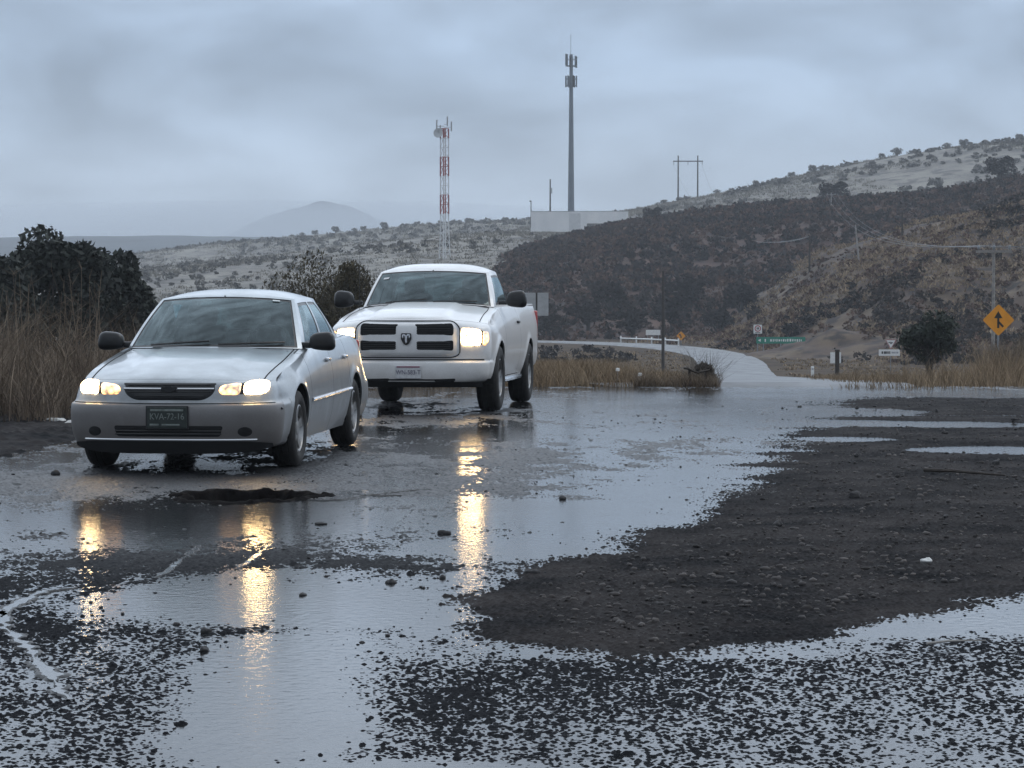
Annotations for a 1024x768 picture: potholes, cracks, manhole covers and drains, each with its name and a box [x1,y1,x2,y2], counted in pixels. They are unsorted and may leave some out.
pothole [168,487,335,505]
